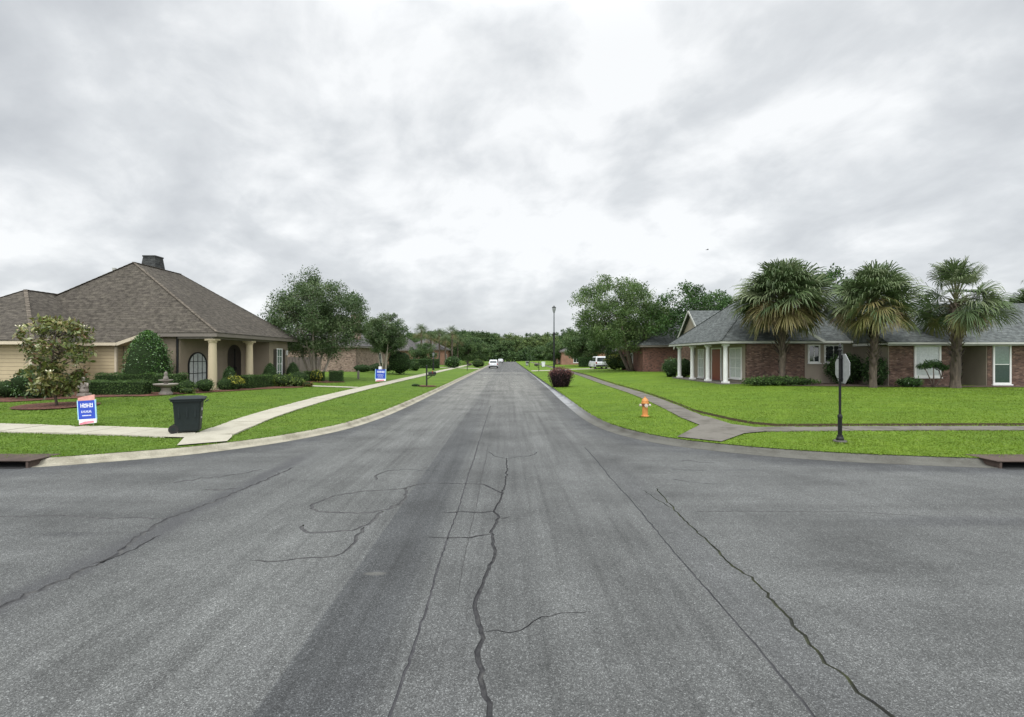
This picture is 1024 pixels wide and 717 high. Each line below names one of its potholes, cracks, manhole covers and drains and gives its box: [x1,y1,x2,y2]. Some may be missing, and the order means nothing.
drain grate [0,454,59,469]
crack [0,449,590,717]
crack [645,460,916,717]
drain grate [965,454,1024,470]
